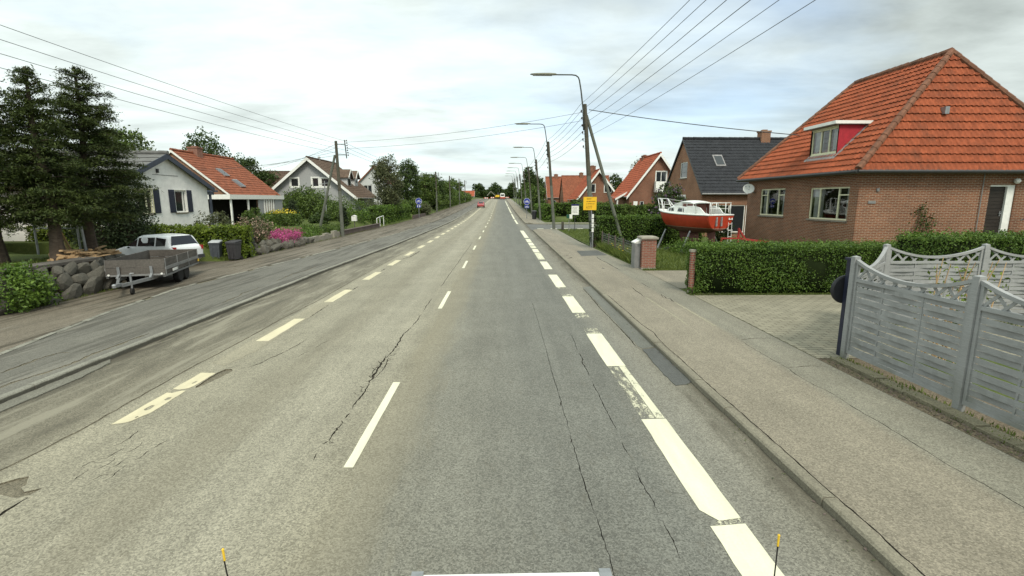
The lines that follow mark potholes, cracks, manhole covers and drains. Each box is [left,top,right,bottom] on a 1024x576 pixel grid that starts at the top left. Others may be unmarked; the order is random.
crack [313,243,472,461]
crack [534,309,615,576]
crack [68,431,167,483]
crack [0,498,27,516]
